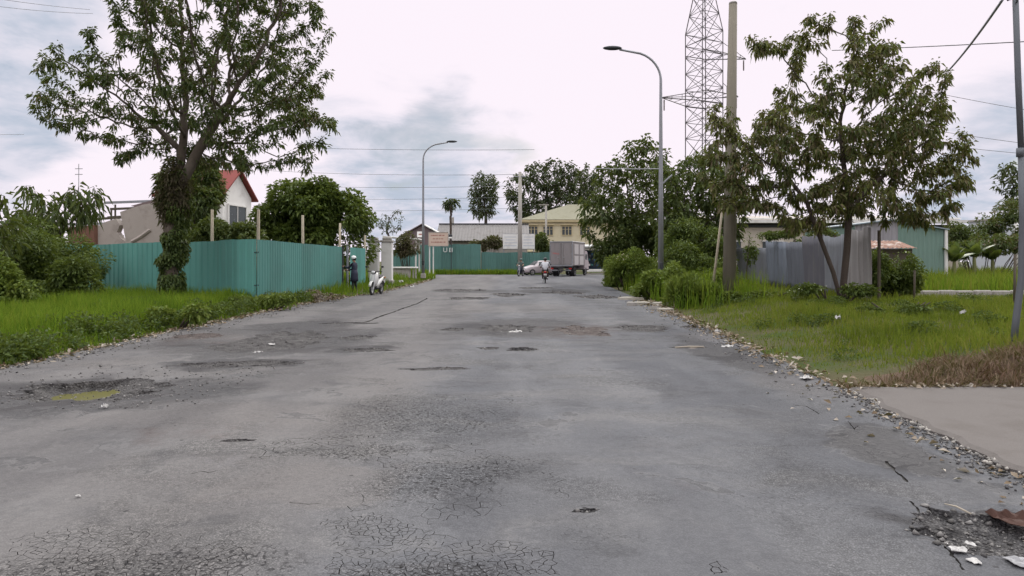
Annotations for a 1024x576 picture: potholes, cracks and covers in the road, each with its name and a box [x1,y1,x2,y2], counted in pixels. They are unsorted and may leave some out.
crack [320,394,560,576]
pothole [904,503,1024,558]
pothole [10,378,176,402]
crack [6,525,249,576]
pothole [479,324,538,332]
pothole [551,325,612,337]
pothole [176,360,305,368]
crack [885,461,964,570]
